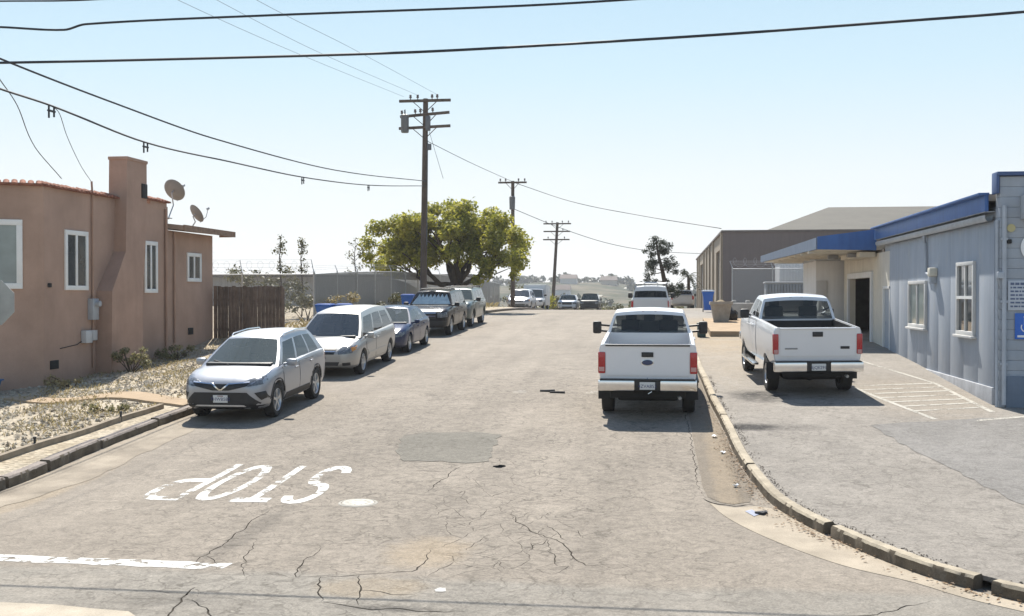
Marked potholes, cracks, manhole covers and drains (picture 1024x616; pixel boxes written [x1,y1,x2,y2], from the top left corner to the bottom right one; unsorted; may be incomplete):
crack [421,459,626,576]
crack [196,515,262,576]
manhole cover [338,499,378,507]
crack [859,602,927,616]
crack [294,542,431,605]
